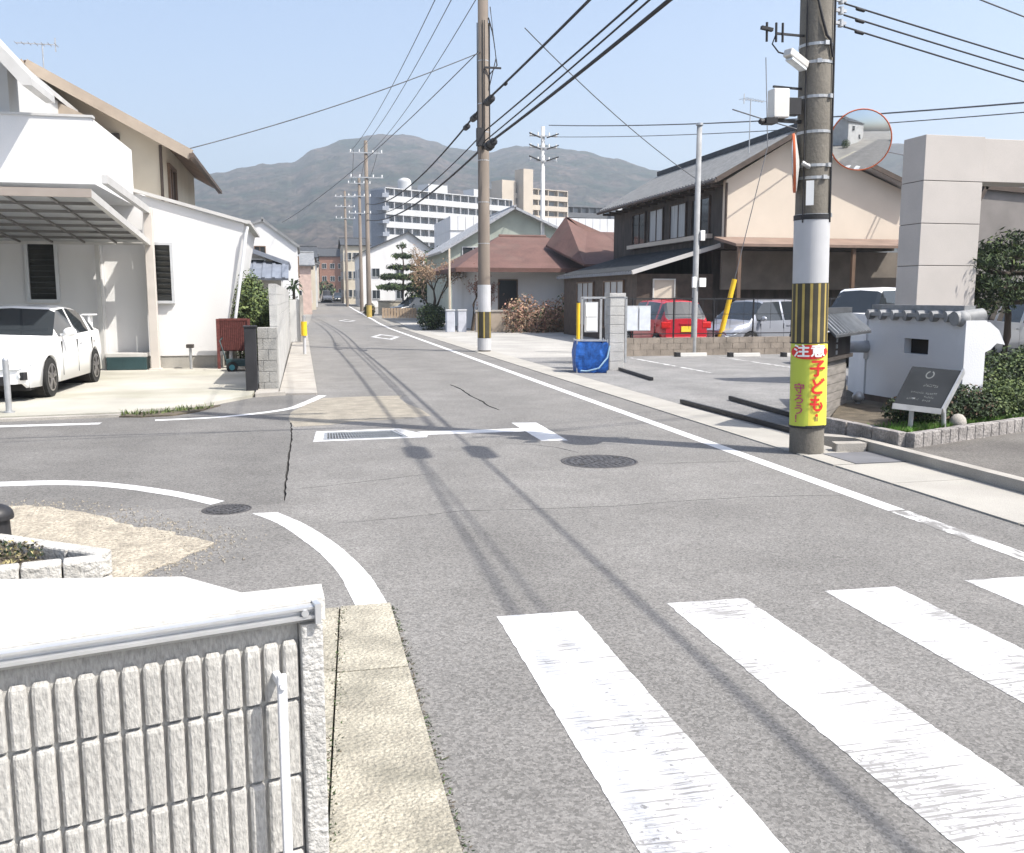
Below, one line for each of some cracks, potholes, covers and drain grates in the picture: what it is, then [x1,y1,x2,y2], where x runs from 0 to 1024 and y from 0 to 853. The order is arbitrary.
crack [451,385,499,410]
crack [284,422,433,500]
drain grate [324,430,407,440]
manhole cover [561,455,638,468]
manhole cover [201,504,252,515]
